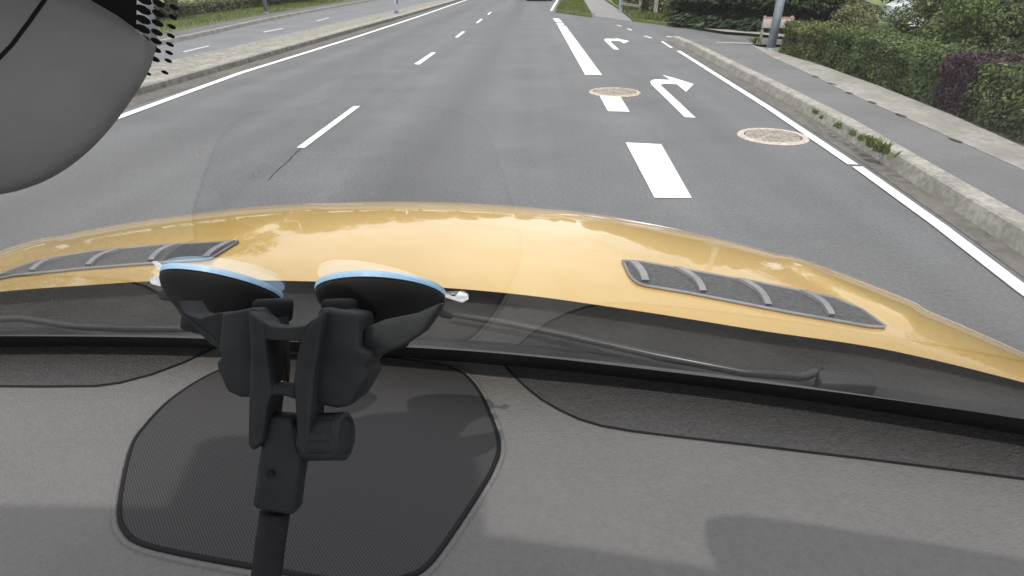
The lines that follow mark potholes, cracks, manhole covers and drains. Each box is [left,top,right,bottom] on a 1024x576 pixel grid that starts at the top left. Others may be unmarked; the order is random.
manhole cover [589,87,641,97]
manhole cover [737,128,810,145]
